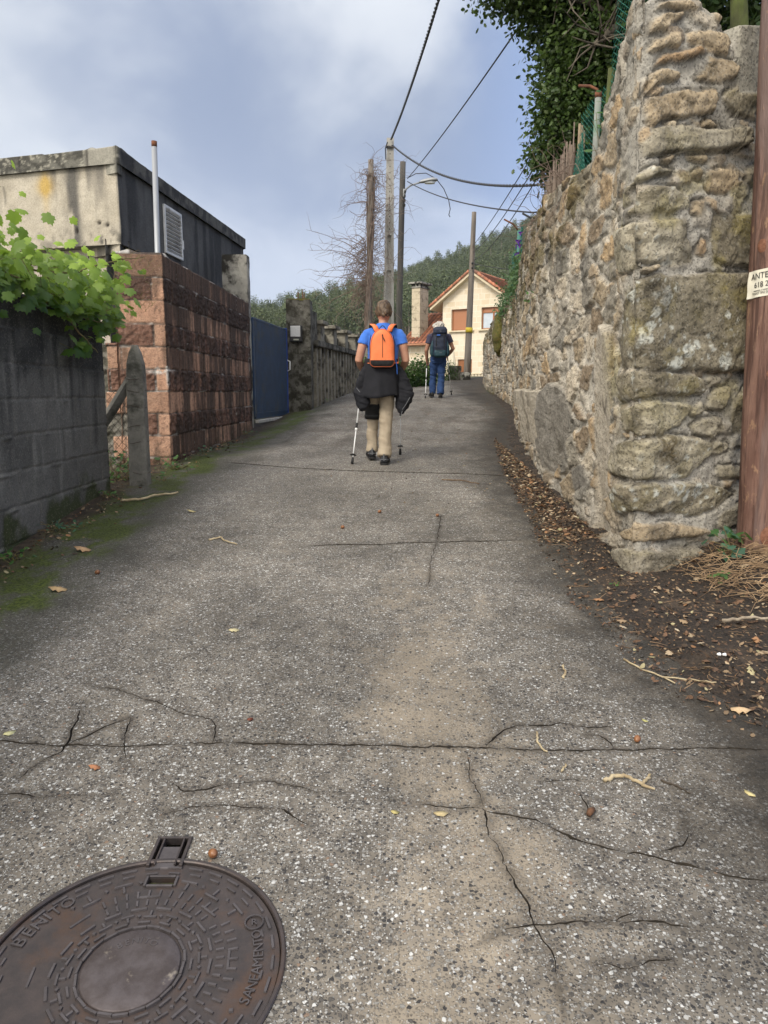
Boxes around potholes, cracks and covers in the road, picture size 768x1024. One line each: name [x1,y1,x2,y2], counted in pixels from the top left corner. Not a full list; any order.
crack [417,722,766,975]
crack [168,781,320,825]
crack [18,687,217,779]
manhole cover [0,836,286,1024]
